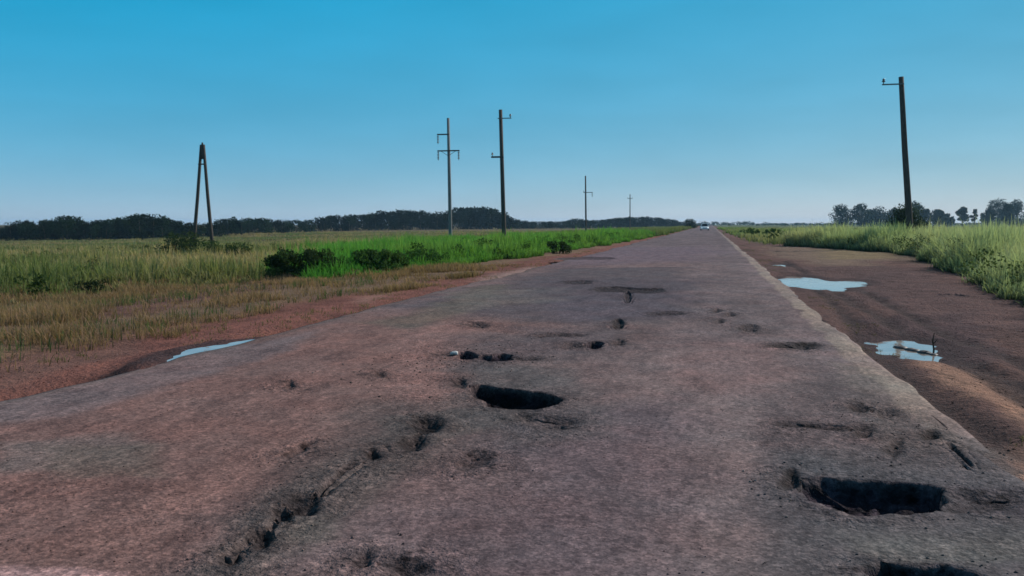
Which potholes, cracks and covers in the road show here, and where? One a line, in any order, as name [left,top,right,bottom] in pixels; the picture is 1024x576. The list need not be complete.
crack [265,435,364,500]
pothole [378,432,448,456]
pothole [603,318,634,331]
pothole [358,548,460,576]
pothole [787,475,955,524]
pothole [758,341,832,352]
pothole [584,341,610,351]
pothole [461,384,574,413]
crack [210,513,289,565]
pothole [837,555,999,576]
pothole [390,412,462,437]
